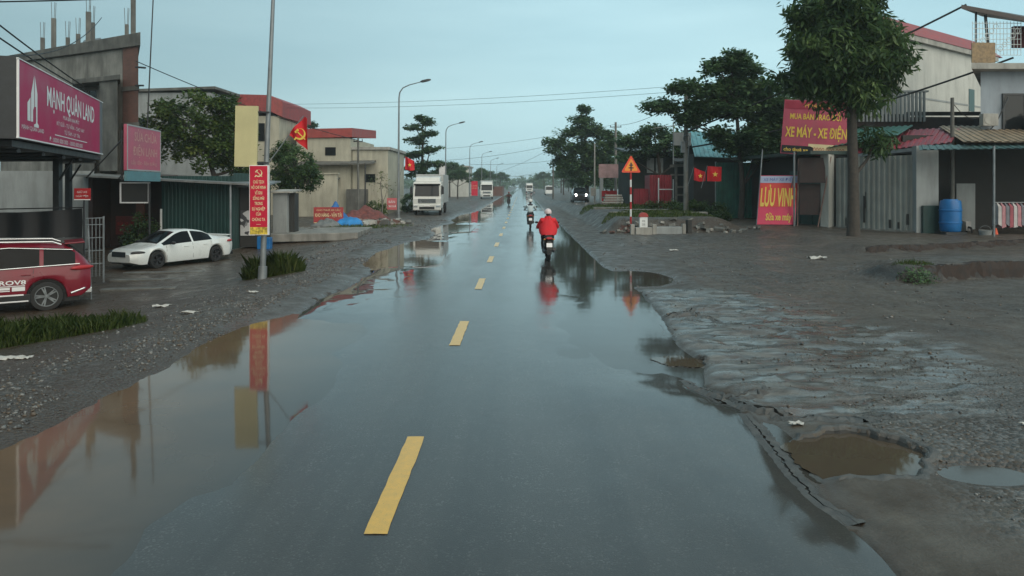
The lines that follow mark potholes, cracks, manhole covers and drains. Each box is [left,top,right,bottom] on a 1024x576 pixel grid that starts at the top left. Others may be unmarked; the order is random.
pothole [772,424,940,484]
crack [679,380,969,527]
pothole [650,355,710,368]
